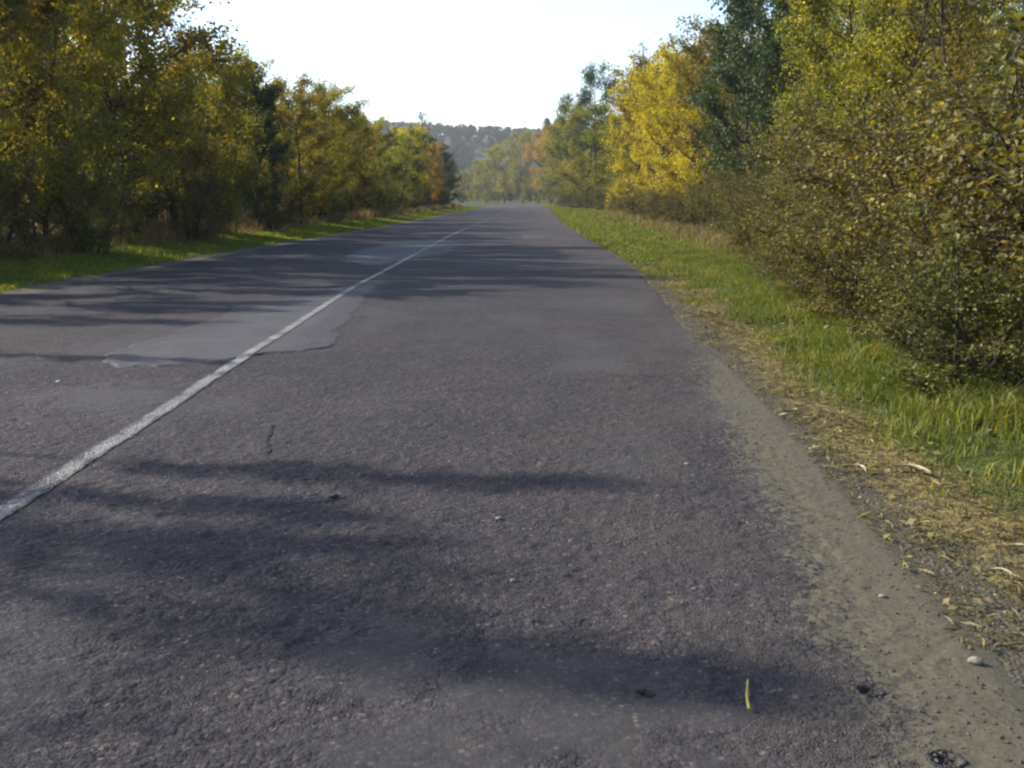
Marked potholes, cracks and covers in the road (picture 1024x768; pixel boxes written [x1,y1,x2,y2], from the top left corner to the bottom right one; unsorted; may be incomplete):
pothole [924,749,968,768]
pothole [854,684,886,698]
crack [266,424,275,457]
